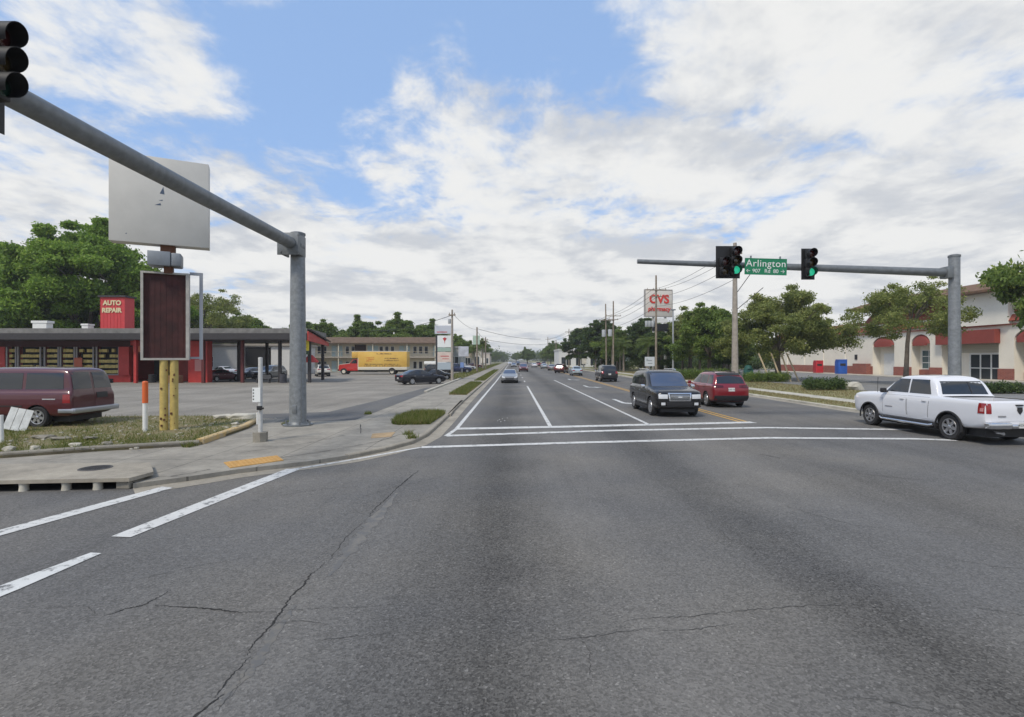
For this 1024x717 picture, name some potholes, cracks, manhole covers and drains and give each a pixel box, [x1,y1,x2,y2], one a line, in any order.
crack [50,471,436,717]
crack [540,604,854,674]
drain grate [0,462,154,492]
